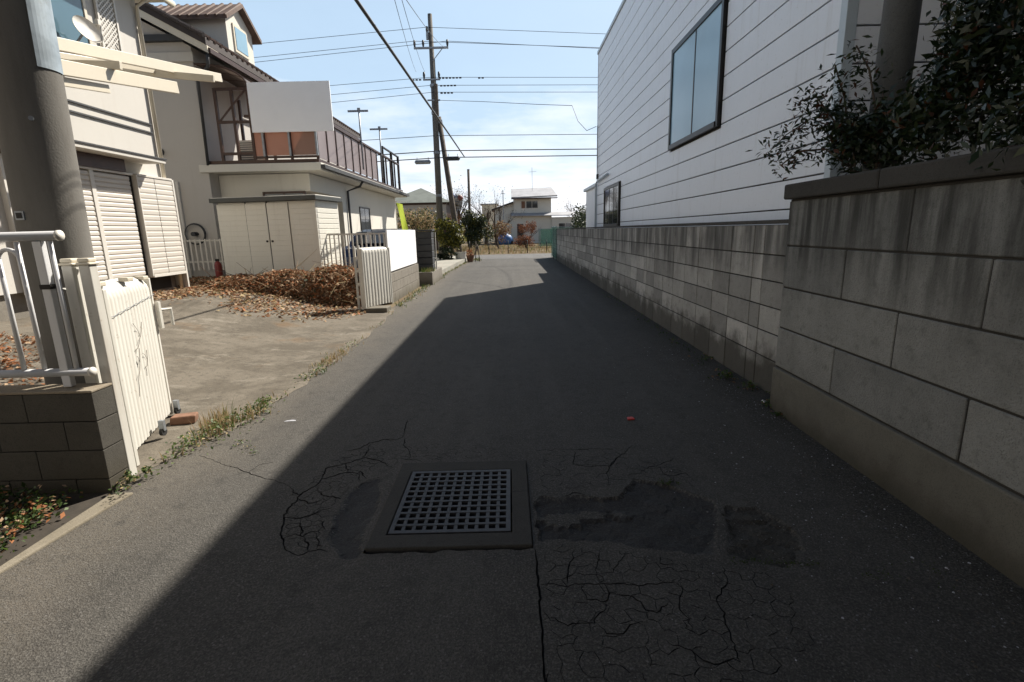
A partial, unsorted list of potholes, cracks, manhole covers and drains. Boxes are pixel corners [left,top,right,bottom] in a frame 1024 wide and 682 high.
crack [535,544,815,682]
crack [199,420,516,556]
pothole [532,478,721,556]
drain grate [365,460,532,554]
pothole [721,504,806,569]
pothole [326,476,385,560]
crack [537,447,695,496]
